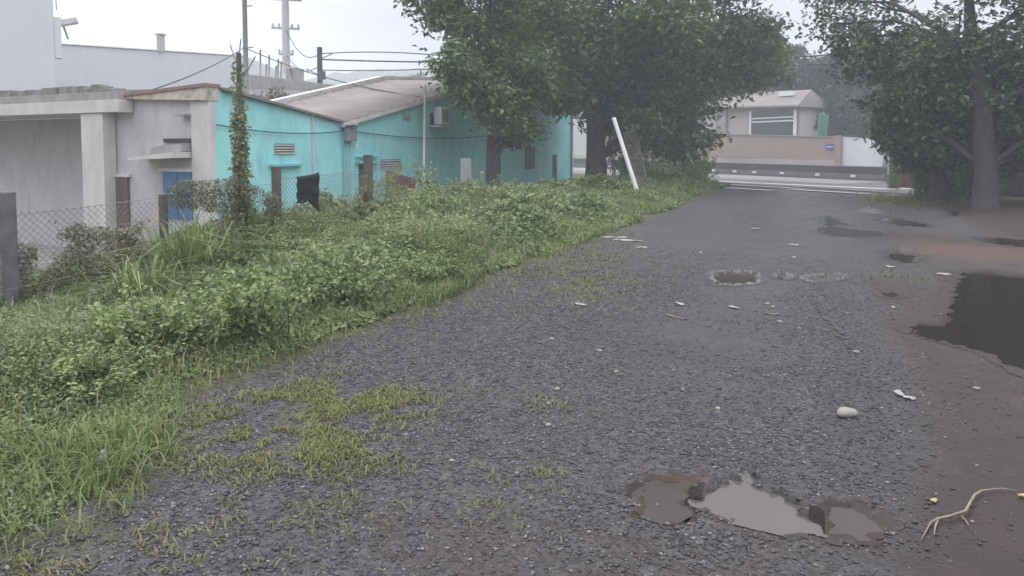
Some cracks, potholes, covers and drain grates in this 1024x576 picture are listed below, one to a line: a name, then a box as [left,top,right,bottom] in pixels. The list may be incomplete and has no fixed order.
pothole [629,469,707,525]
pothole [973,236,1024,247]
pothole [796,271,853,283]
pothole [809,493,893,547]
pothole [813,225,893,238]
pothole [874,216,934,227]
pothole [685,465,828,540]
pothole [704,268,769,287]
pothole [813,214,851,226]
